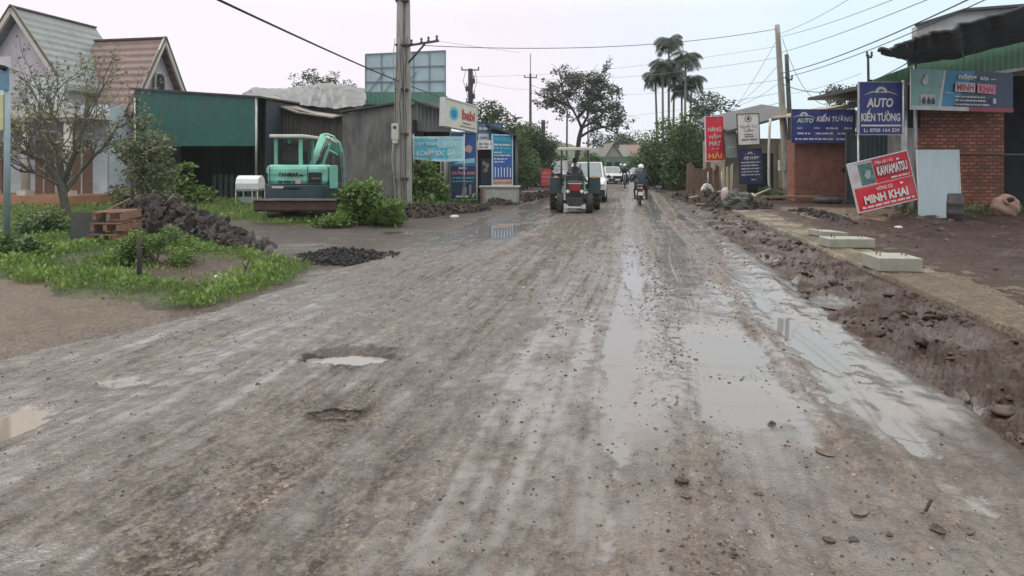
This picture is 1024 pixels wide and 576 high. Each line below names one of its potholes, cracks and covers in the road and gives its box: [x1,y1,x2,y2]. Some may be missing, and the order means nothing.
pothole [284,343,412,370]
pothole [300,408,370,423]
